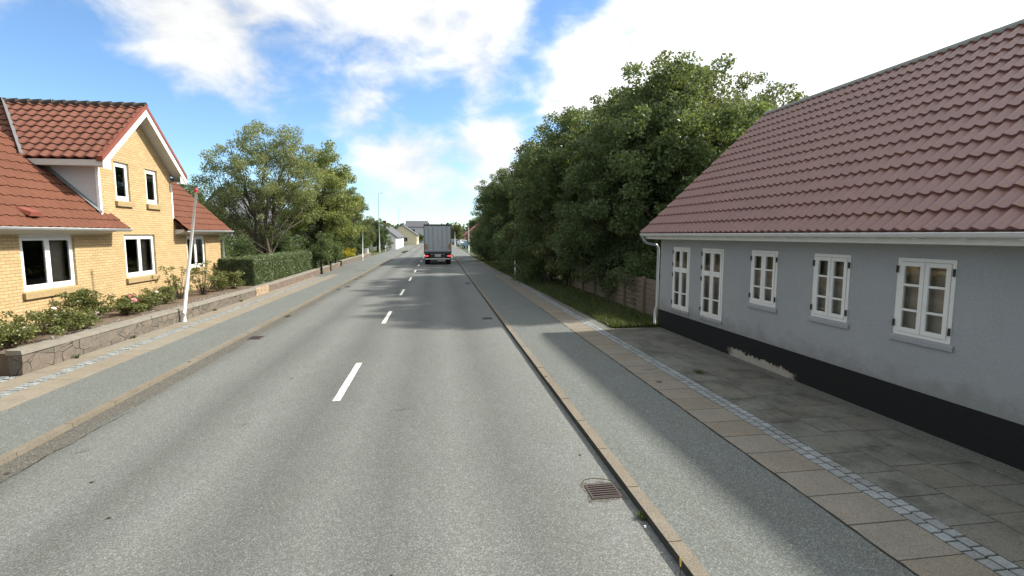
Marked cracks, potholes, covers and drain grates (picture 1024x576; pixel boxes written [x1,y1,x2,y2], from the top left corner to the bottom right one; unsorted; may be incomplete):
drain grate [580,481,628,503]
